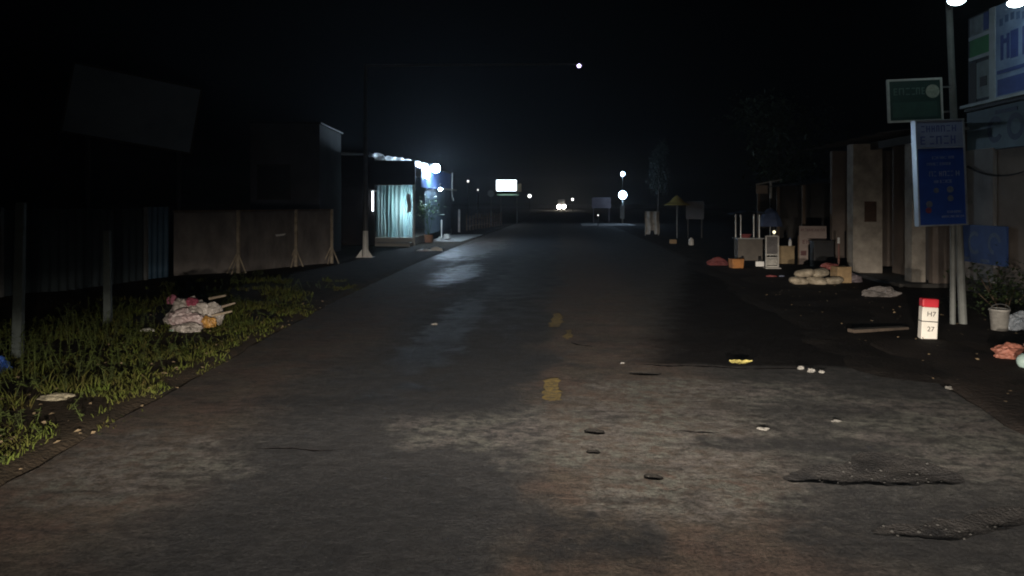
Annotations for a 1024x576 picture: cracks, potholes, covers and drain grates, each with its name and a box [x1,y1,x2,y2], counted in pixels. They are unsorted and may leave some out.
pothole [871,506,1024,541]
pothole [782,452,965,486]
